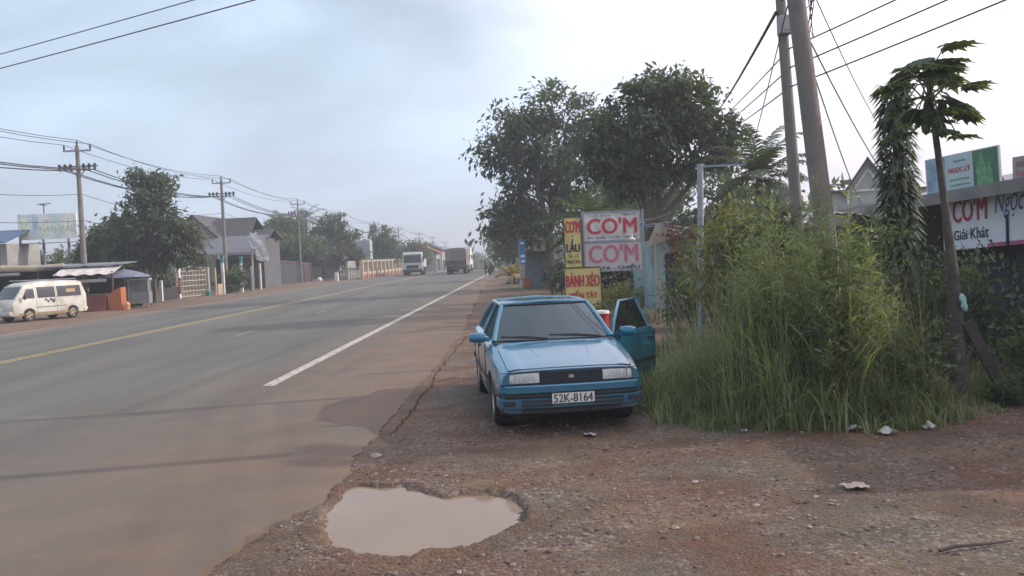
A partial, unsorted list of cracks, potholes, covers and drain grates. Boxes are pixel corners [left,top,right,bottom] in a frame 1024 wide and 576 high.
pothole [298,478,549,565]
crack [389,336,467,435]
